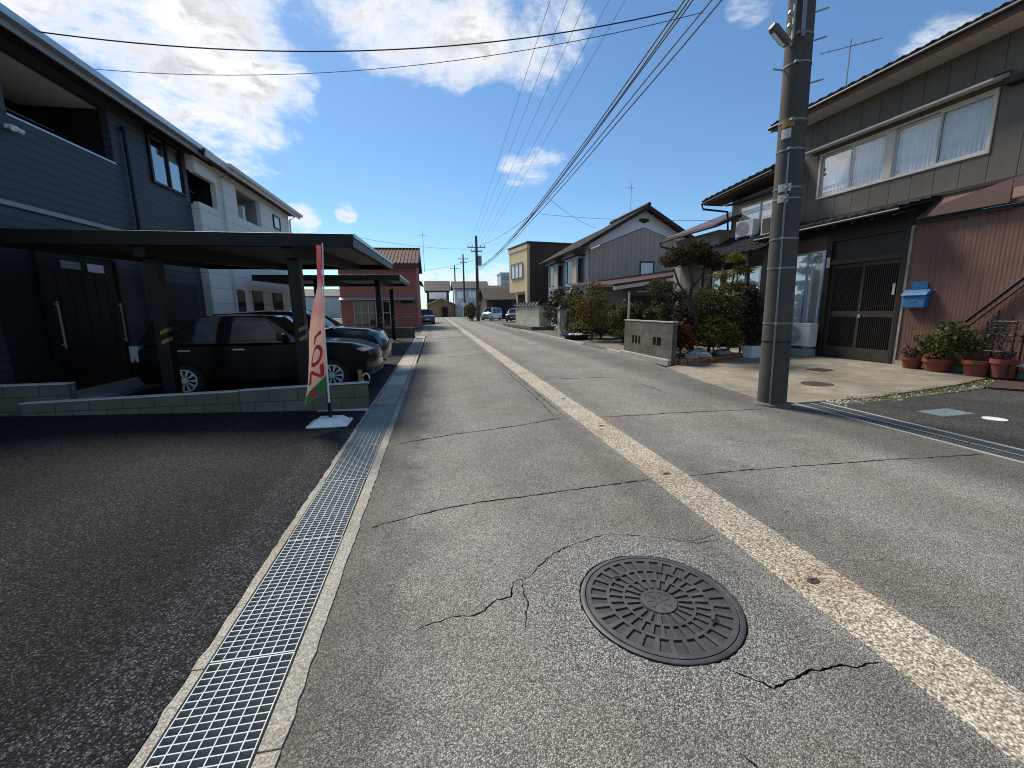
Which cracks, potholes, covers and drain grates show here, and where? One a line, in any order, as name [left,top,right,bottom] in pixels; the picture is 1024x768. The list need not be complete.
drain grate [326,444,380,482]
drain grate [956,442,1024,462]
crack [735,662,883,690]
drain grate [349,422,389,446]
drain grate [144,652,295,768]
drain grate [363,406,396,423]
drain grate [288,478,365,541]
manhole cover [579,556,749,667]
crack [691,454,980,476]
drain grate [210,536,343,664]
drain grate [801,402,984,445]
crack [372,479,647,528]
